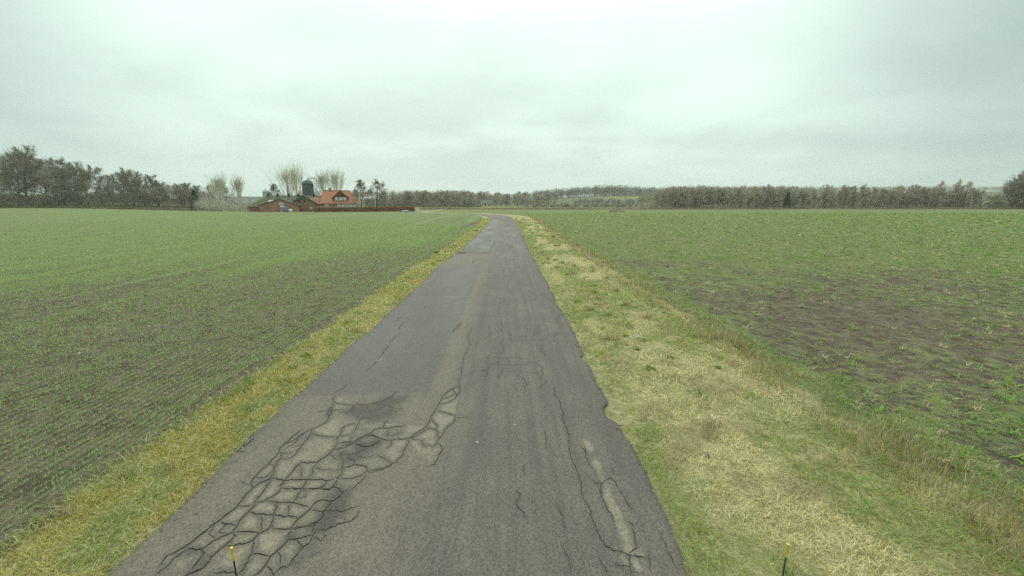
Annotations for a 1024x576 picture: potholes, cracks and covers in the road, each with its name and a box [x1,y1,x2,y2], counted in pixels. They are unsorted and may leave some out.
crack [154,328,472,576]
crack [484,293,678,576]
